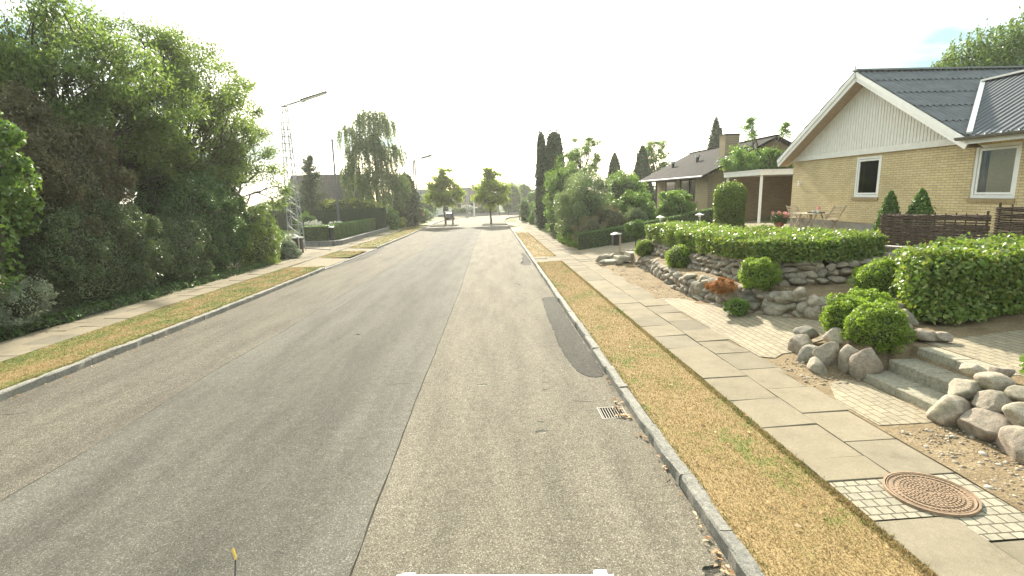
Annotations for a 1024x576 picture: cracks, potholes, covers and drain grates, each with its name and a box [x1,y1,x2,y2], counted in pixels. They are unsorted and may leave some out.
manhole cover [882,471,982,518]
drain grate [597,407,628,419]
